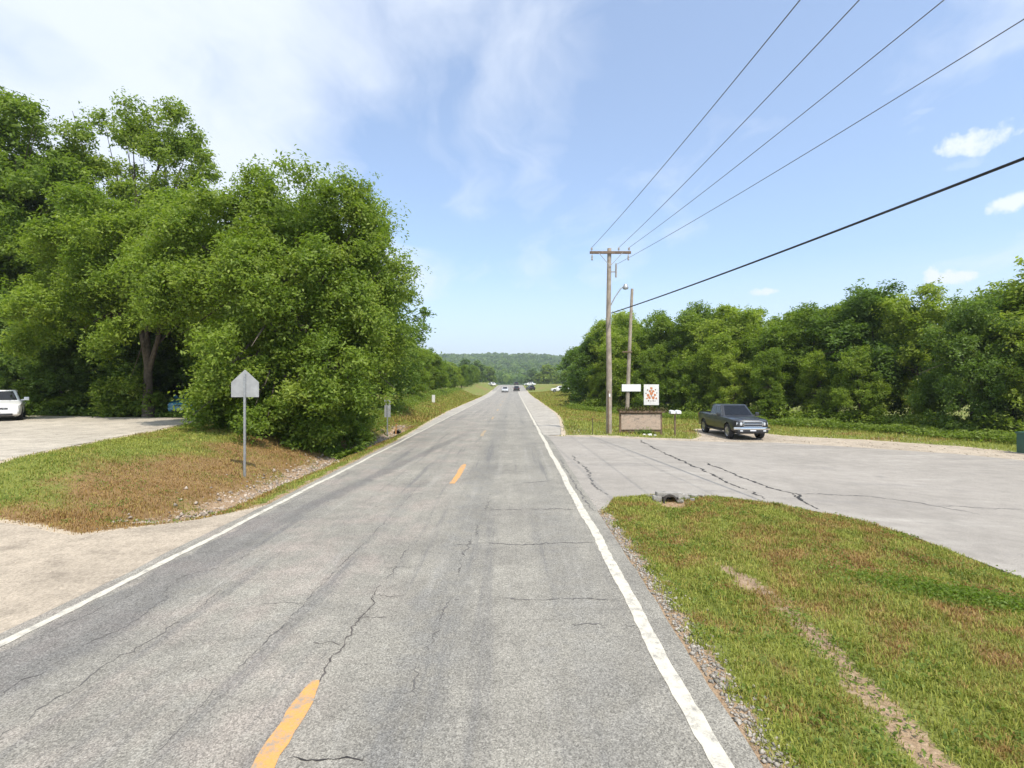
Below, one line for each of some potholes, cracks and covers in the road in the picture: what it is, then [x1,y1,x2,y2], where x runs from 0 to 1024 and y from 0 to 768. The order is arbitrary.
crack [1,555,246,735]
crack [643,442,1024,514]
crack [388,491,619,738]
crack [160,464,441,749]
